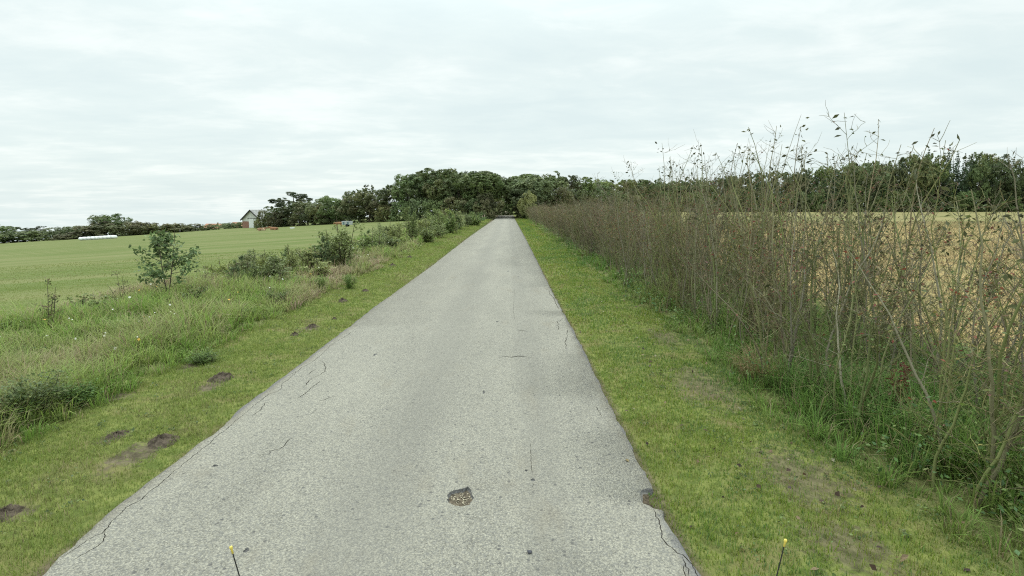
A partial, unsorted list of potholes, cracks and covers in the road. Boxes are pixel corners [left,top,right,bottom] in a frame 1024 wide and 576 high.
pothole [447,486,474,507]
crack [654,511,698,576]
pothole [640,490,666,516]
crack [66,332,351,562]
